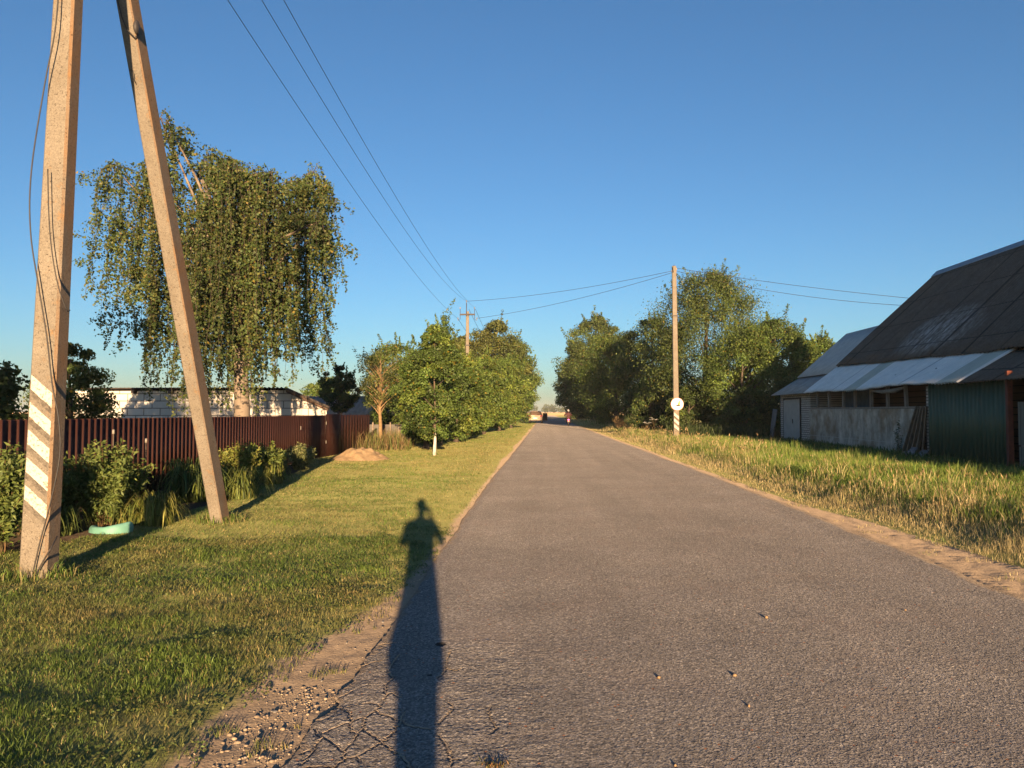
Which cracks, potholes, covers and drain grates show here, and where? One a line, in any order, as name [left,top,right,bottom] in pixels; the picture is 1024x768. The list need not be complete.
crack [301,642,458,768]
